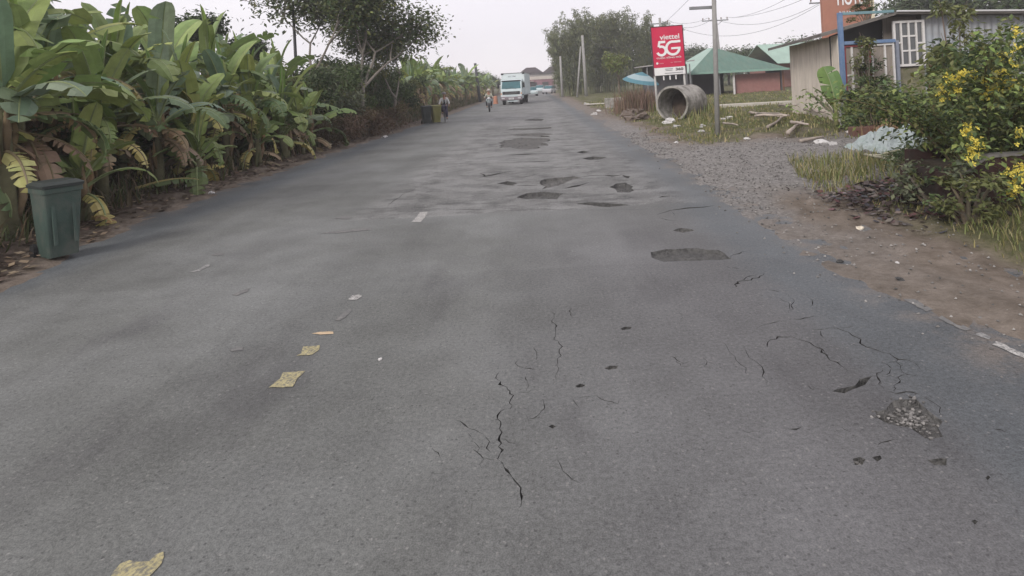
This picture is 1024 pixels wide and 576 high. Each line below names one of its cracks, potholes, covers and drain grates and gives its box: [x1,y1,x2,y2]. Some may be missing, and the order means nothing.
pothole [611,183,634,193]
pothole [870,394,947,439]
pothole [832,376,872,393]
pothole [540,176,580,189]
pothole [499,138,550,149]
crack [671,251,941,414]
crack [552,310,571,379]
crack [435,349,545,507]
pothole [651,248,731,262]
